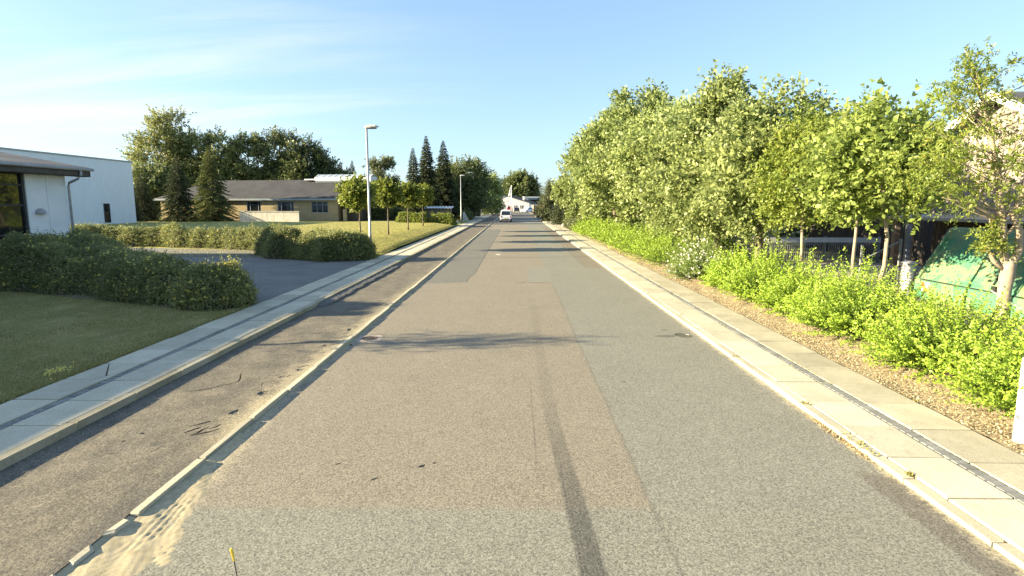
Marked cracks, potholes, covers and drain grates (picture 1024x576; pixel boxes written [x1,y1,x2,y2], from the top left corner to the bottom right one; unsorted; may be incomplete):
crack [184,421,221,436]
